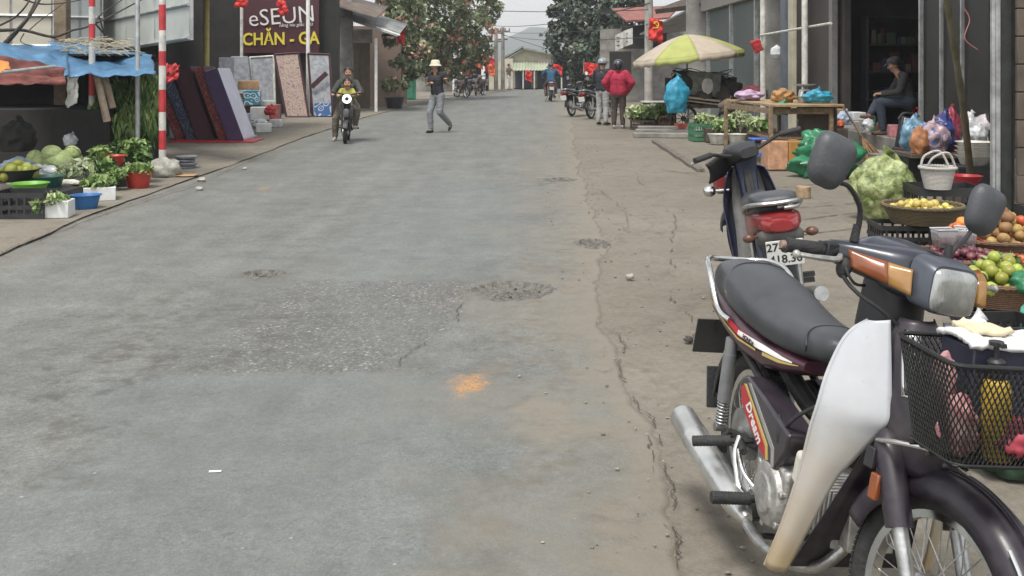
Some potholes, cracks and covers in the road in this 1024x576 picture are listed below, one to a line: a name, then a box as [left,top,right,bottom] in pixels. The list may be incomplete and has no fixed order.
pothole [463,281,557,302]
crack [660,210,694,337]
pothole [577,238,611,249]
pothole [240,269,286,279]
crack [594,321,682,568]
